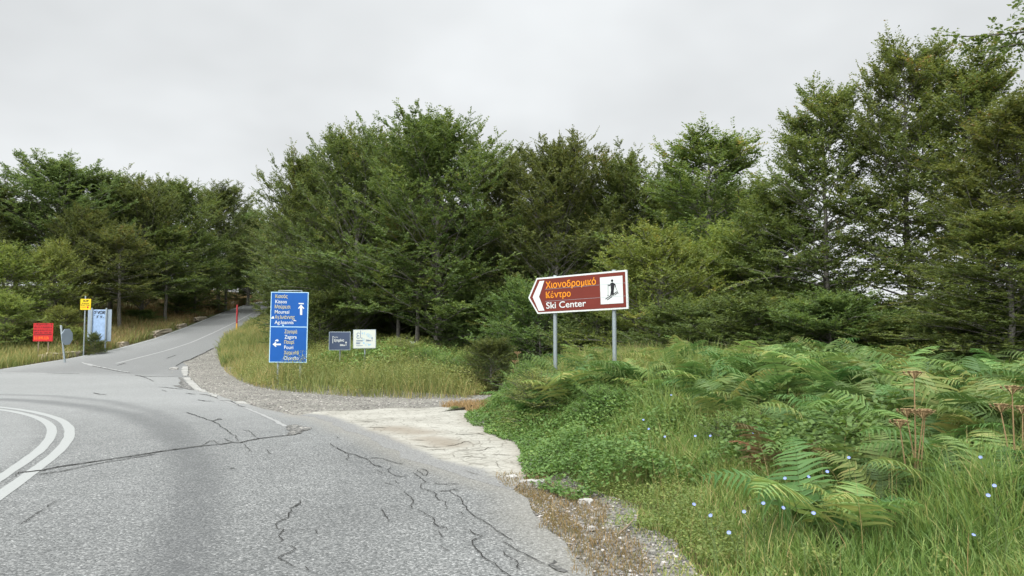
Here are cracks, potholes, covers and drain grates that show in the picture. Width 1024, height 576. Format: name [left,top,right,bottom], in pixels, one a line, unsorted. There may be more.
crack [330,433,546,576]
crack [275,500,309,570]
crack [15,363,285,476]
